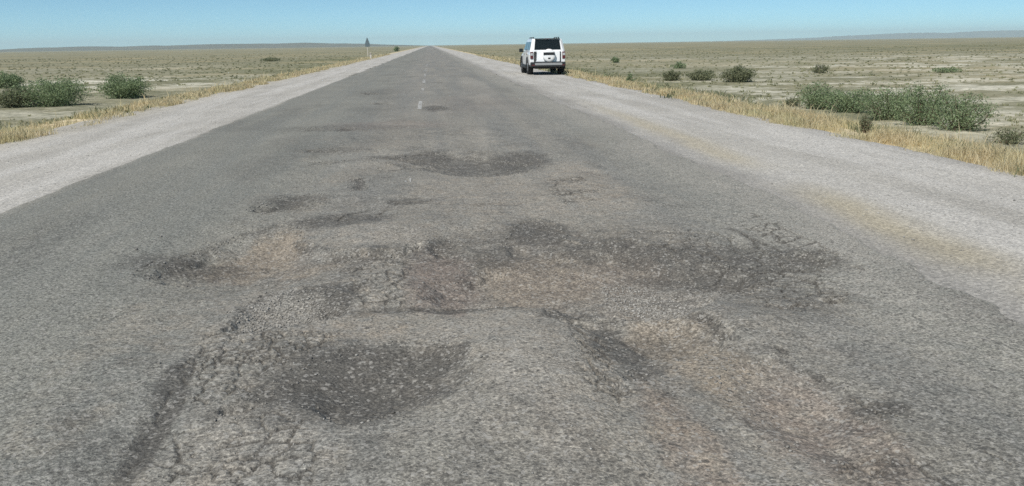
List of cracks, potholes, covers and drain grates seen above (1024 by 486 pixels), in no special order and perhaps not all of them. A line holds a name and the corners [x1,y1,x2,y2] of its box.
pothole [418,219,714,320]
pothole [248,194,323,214]
pothole [795,275,829,285]
crack [633,213,865,312]
crack [546,176,608,204]
pothole [653,249,765,296]
pothole [778,251,835,268]
pothole [544,309,731,362]
crack [125,330,340,486]
pothole [219,339,478,425]
pothole [136,224,424,288]
pothole [613,369,655,381]
